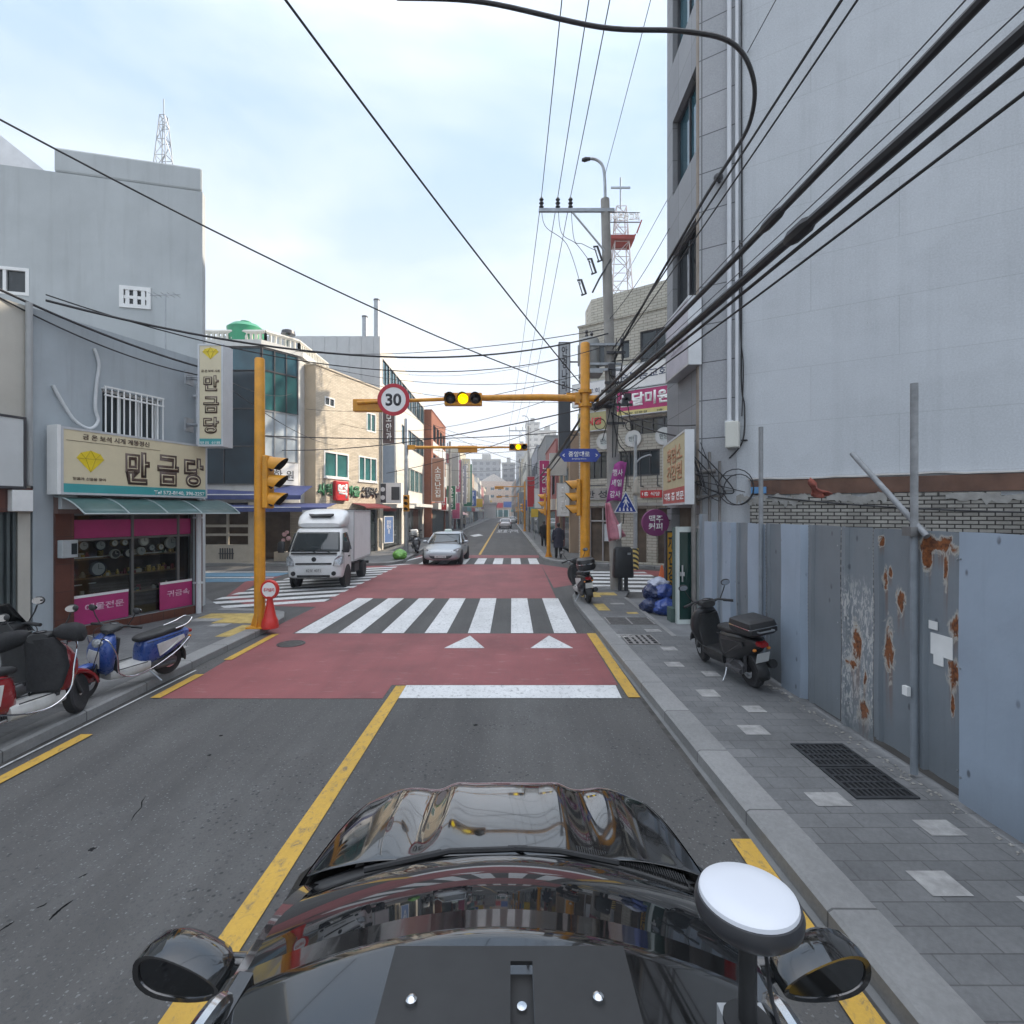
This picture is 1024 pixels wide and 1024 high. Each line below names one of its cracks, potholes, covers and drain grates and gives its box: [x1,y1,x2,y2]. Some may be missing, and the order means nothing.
drain grate [790,743,875,767]
drain grate [620,635,661,645]
drain grate [819,767,920,799]
crack [37,900,73,920]
